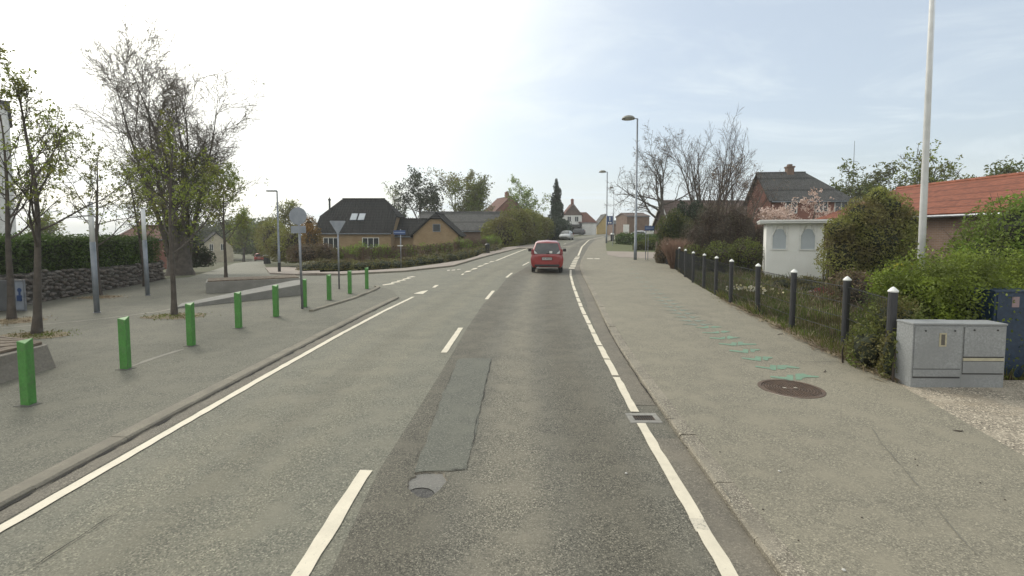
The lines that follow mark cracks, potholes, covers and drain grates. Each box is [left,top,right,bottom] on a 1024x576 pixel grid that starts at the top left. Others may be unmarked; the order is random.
pothole [407,471,448,498]
crack [31,509,122,568]
drain grate [625,413,663,423]
manhole cover [757,379,826,399]
